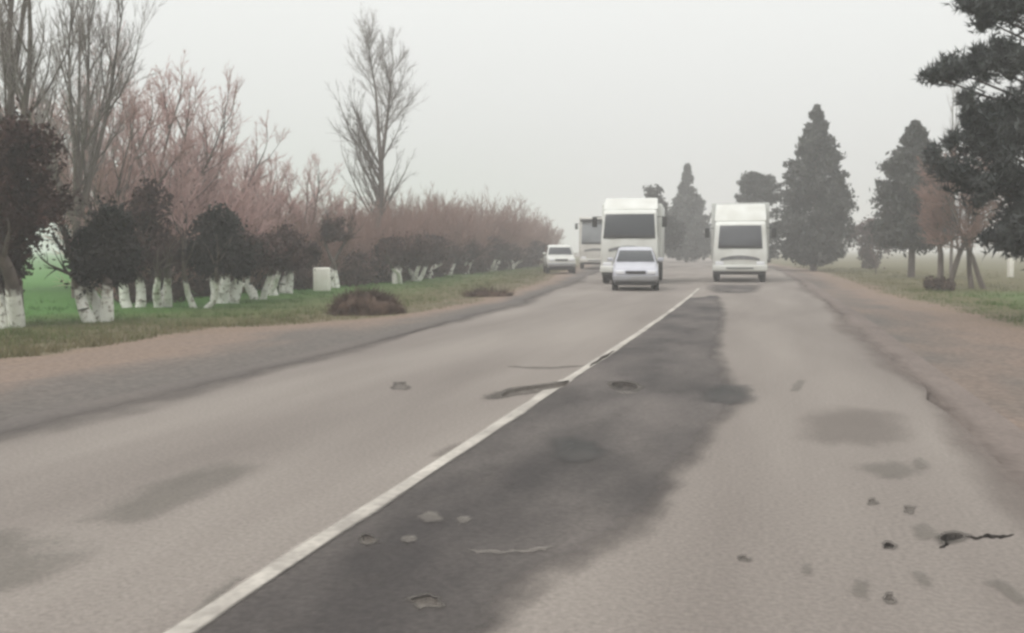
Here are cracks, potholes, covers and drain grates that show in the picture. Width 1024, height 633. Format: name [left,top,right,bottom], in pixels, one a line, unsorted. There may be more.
pothole [358,533,378,544]
pothole [608,381,644,391]
pothole [486,381,569,399]
crack [507,353,611,369]
pothole [407,593,444,609]
